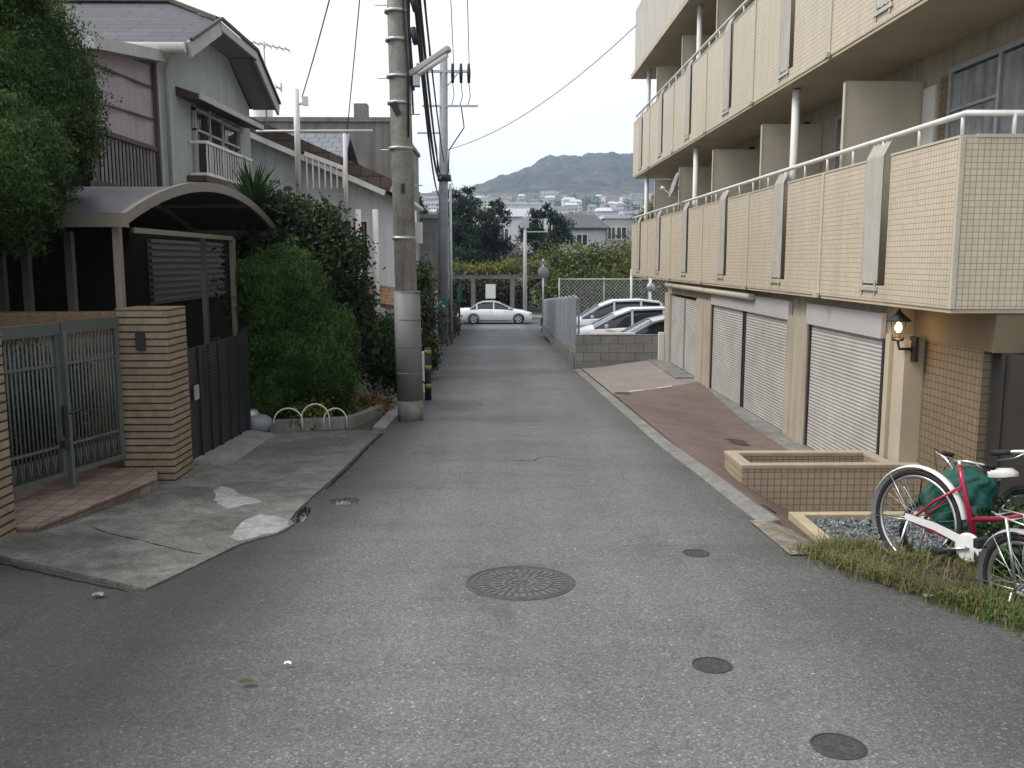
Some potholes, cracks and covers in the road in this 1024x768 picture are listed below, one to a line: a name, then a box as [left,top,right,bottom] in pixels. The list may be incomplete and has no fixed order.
manhole cover [810,732,867,760]
manhole cover [465,566,575,601]
manhole cover [682,549,709,557]
pothole [329,497,360,505]
crack [91,526,202,554]
pothole [296,506,311,524]
manhole cover [692,657,732,674]
